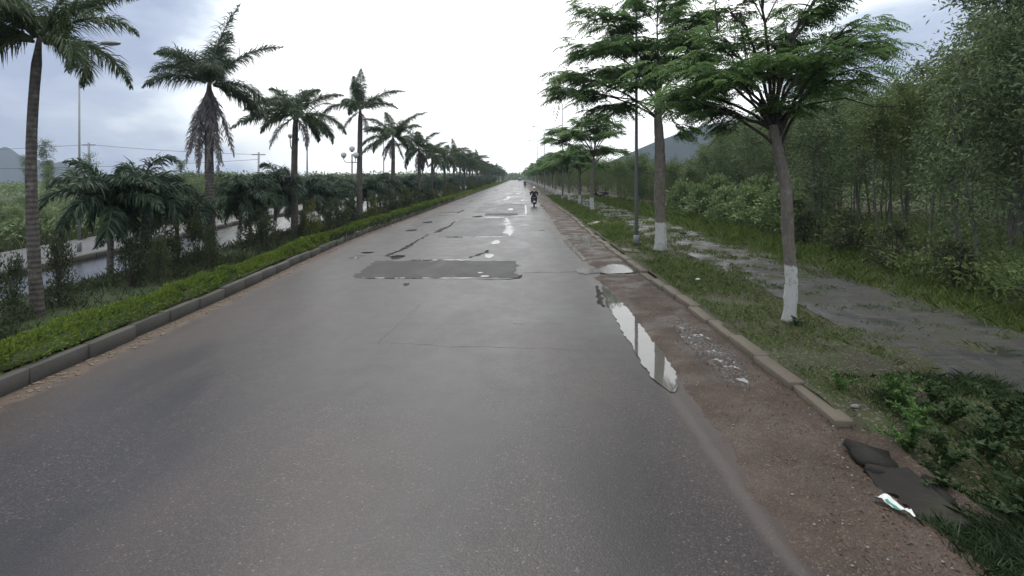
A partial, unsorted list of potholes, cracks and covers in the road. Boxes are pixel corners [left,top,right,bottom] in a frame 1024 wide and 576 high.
crack [377,304,564,350]
